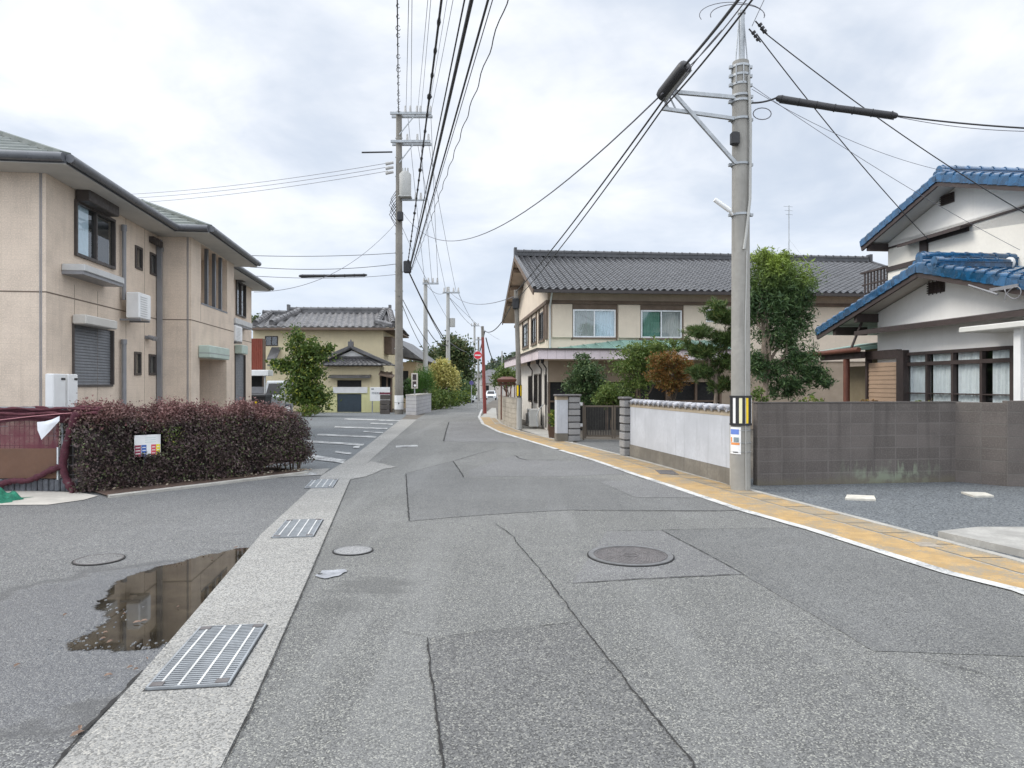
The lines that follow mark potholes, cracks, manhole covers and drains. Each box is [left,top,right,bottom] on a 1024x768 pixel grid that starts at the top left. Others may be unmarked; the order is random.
manhole cover [71,553,126,566]
crack [495,523,695,768]
crack [400,630,445,768]
drain grate [143,623,268,691]
drain grate [271,519,324,538]
manhole cover [332,546,374,556]
drain grate [305,479,338,488]
manhole cover [587,545,675,567]
